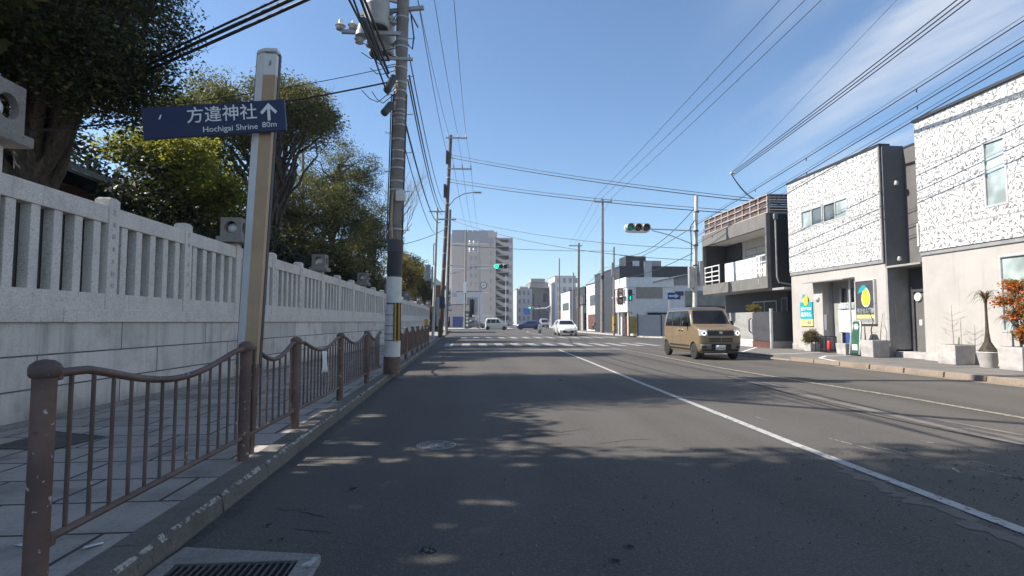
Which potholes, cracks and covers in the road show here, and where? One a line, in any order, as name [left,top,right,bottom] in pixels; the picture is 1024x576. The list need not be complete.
manhole cover [416,441,456,450]
drain grate [146,547,321,576]
crack [275,508,328,532]
